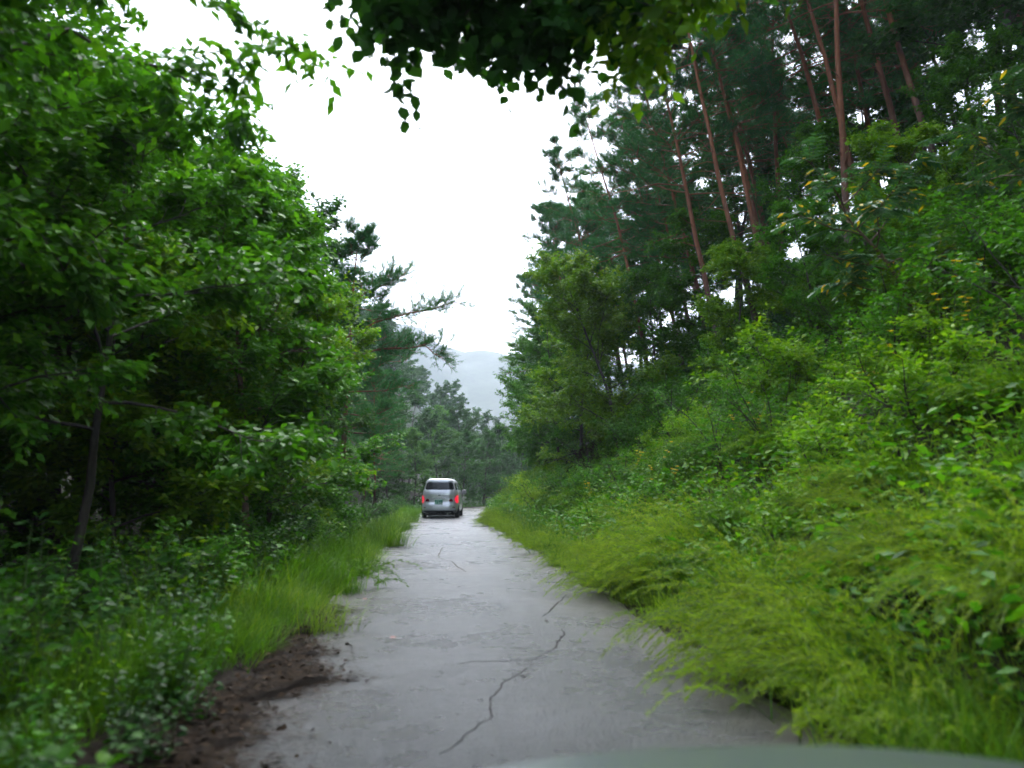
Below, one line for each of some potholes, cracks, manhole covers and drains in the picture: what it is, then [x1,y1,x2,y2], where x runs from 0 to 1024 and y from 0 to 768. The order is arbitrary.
crack [440,595,566,756]
